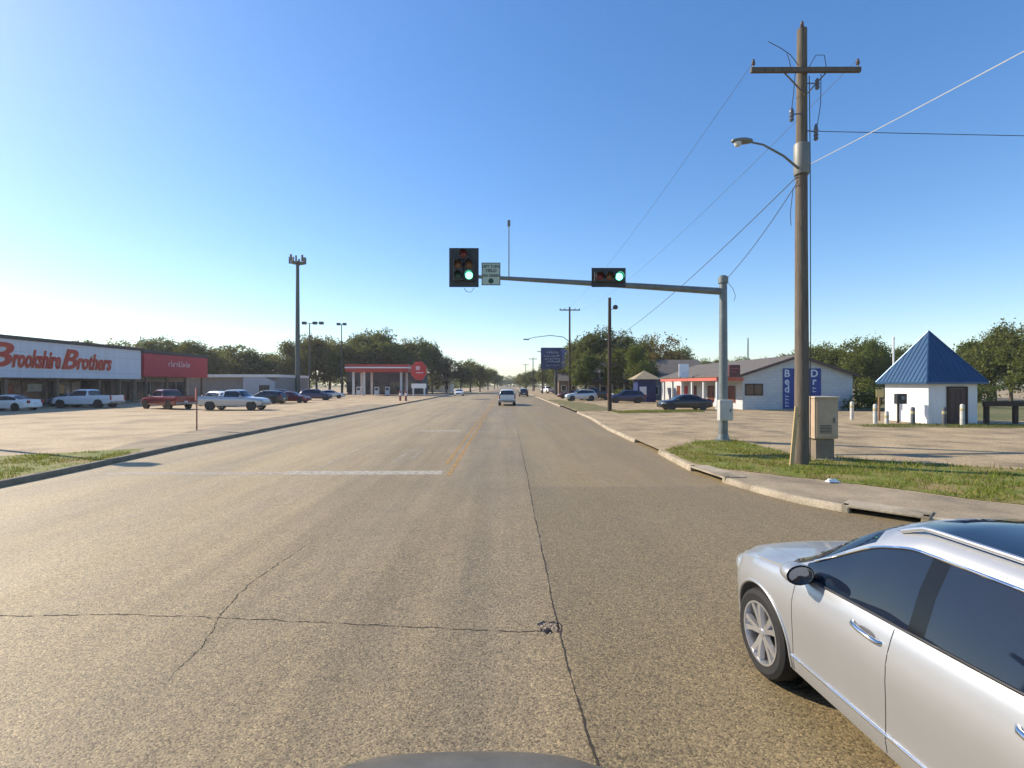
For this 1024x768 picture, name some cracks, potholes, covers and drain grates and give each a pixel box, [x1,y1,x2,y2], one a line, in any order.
pothole [537,621,563,634]
crack [0,528,537,709]
crack [518,434,599,766]
